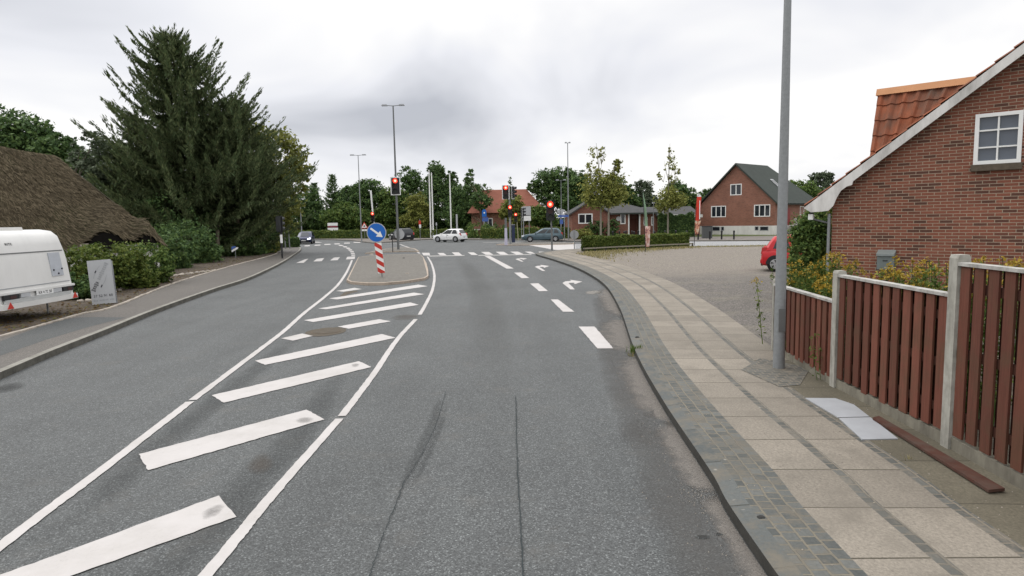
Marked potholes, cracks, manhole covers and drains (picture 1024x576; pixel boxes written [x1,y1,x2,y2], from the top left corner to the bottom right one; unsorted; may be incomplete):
crack [369,391,446,576]
manhole cover [305,327,346,336]
